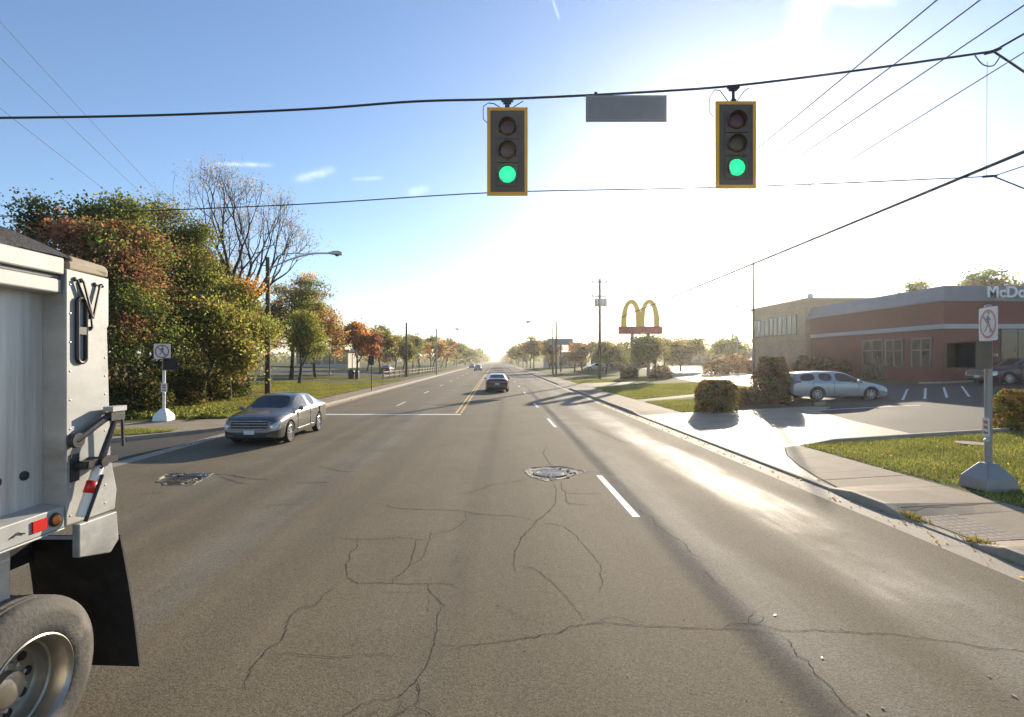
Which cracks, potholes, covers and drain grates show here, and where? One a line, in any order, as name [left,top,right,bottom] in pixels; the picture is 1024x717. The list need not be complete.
manhole cover [533,469,567,478]
crack [342,447,1022,717]
manhole cover [159,477,195,485]
